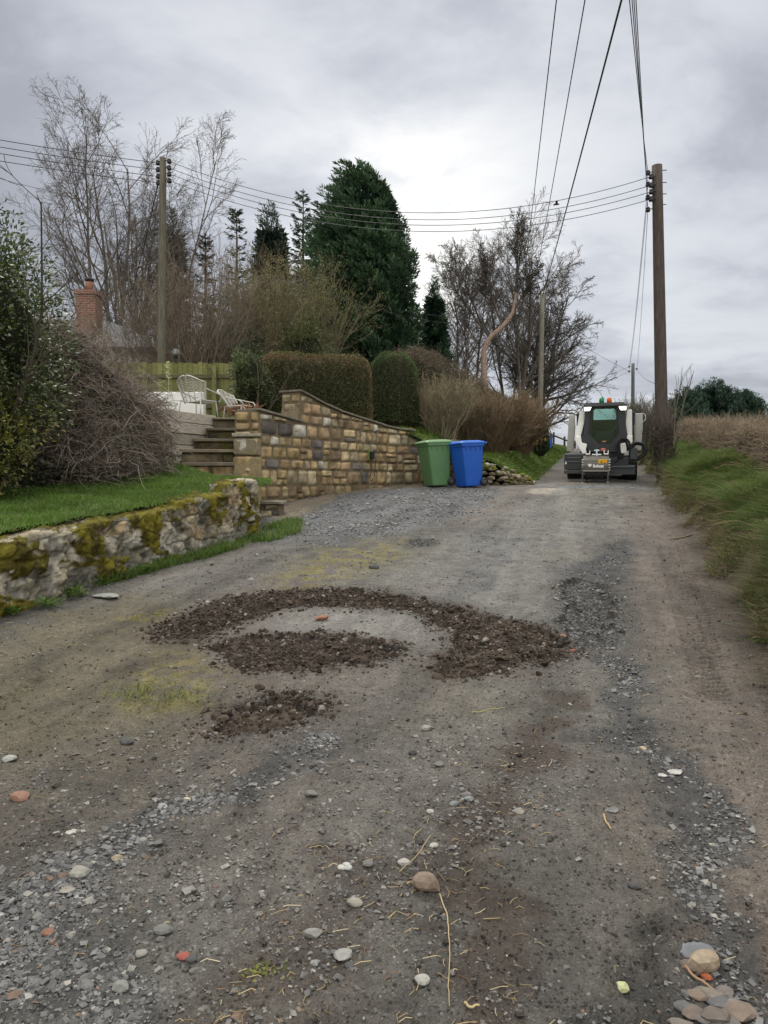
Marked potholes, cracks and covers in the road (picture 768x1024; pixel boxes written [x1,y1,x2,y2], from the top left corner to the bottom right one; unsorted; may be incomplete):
pothole [405,538,441,547]
